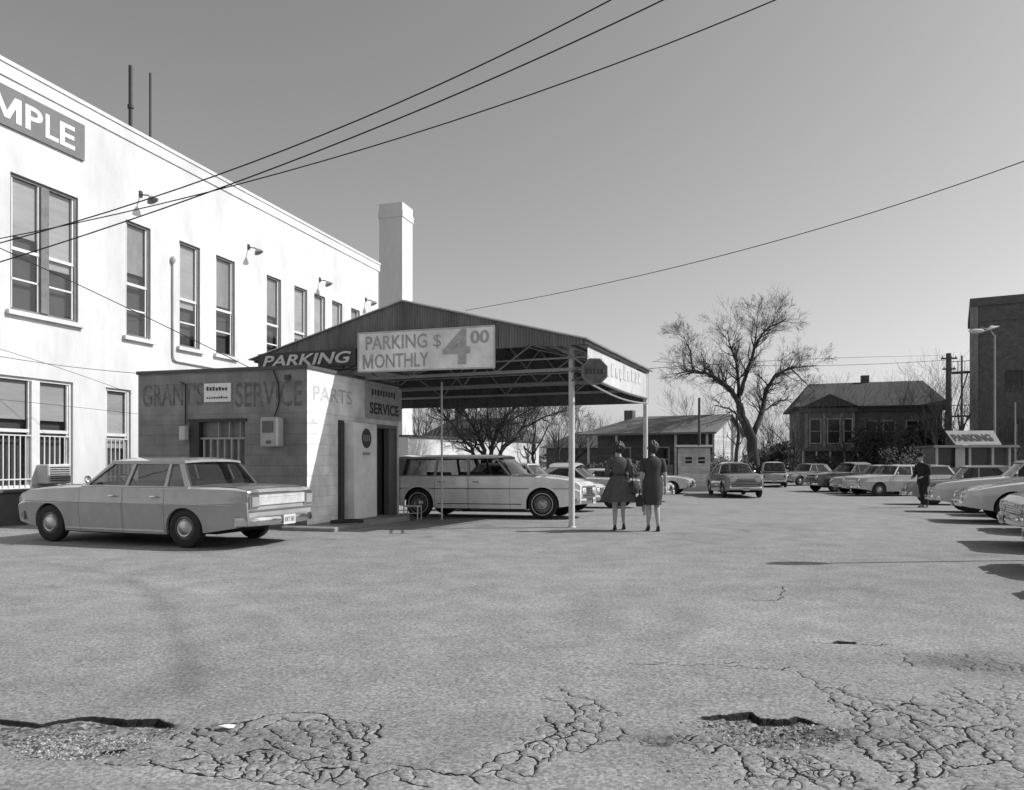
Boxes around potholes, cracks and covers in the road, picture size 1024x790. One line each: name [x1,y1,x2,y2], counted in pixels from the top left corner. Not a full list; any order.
pothole [700,715,849,750]
crack [105,688,629,789]
pothole [0,719,182,758]
crack [629,653,1024,790]
